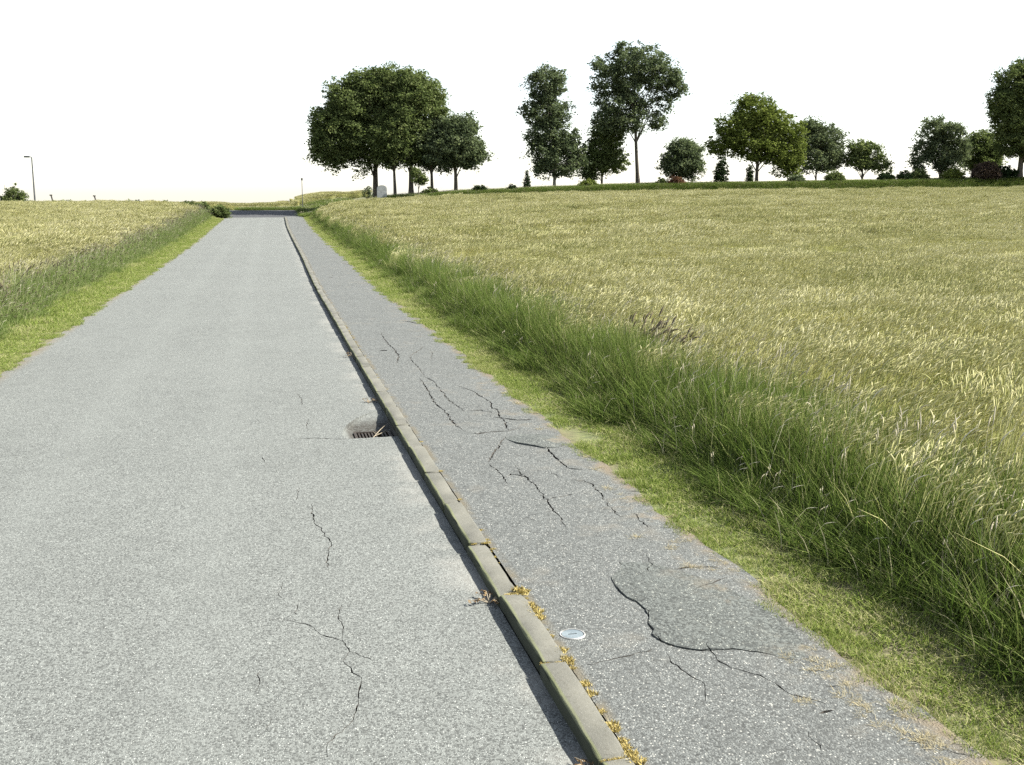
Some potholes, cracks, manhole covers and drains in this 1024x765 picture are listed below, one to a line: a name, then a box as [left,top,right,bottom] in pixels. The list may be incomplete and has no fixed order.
crack [587,562,841,714]
crack [296,488,332,566]
manhole cover [559,628,586,640]
crack [489,449,648,529]
drain grate [353,430,392,438]
crack [278,582,372,757]
crack [380,321,533,434]
